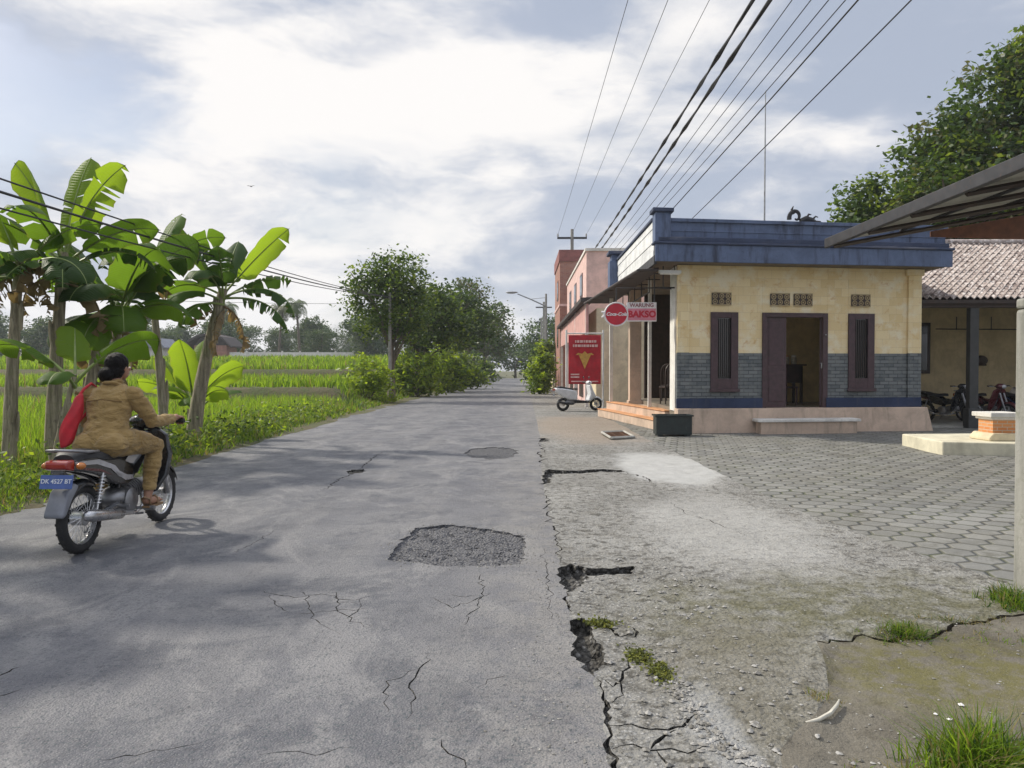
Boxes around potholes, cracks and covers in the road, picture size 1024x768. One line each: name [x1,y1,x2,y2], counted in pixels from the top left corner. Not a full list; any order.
pothole [556,564,635,592]
crack [382,653,430,719]
crack [598,660,703,768]
pothole [570,617,608,677]
crack [257,589,369,633]
crack [434,574,490,622]
crack [441,739,467,768]
crack [109,741,204,760]
crack [260,747,348,756]
